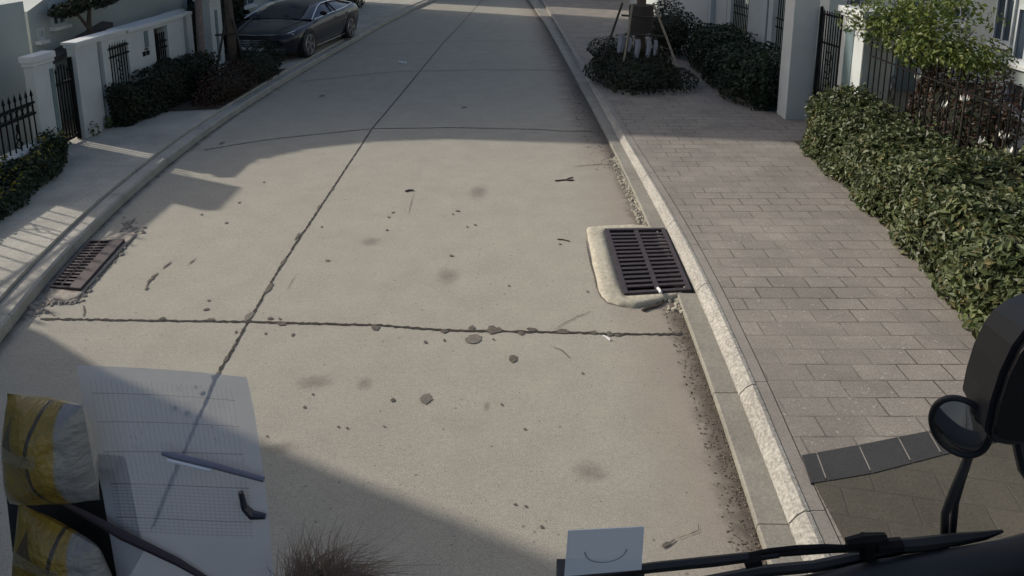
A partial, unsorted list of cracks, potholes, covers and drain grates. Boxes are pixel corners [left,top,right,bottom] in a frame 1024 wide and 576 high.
drain grate [605,228,692,295]
drain grate [49,239,125,291]
